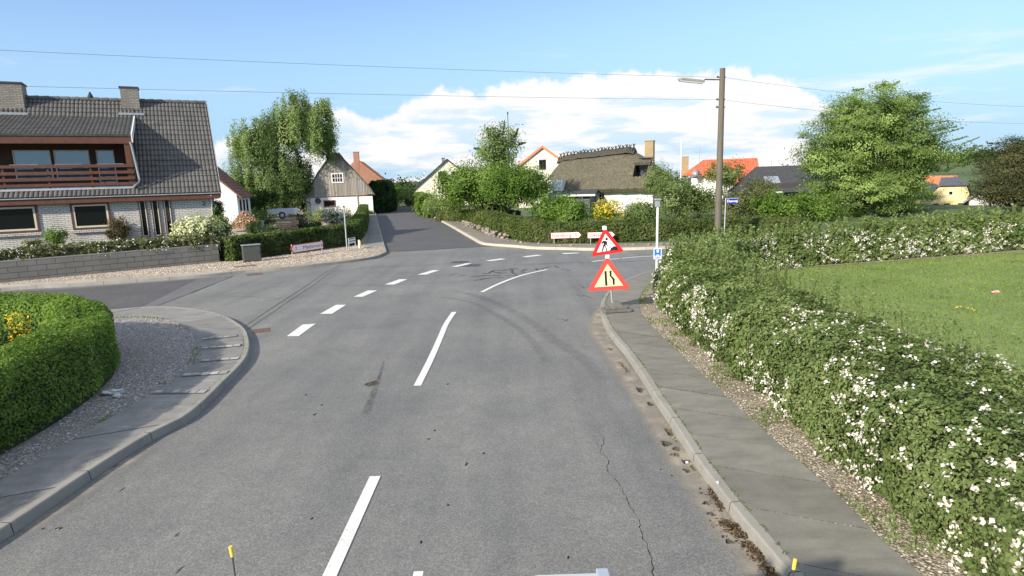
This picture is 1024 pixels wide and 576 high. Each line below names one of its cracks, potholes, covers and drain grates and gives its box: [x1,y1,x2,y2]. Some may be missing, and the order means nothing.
crack [597,429,654,576]
